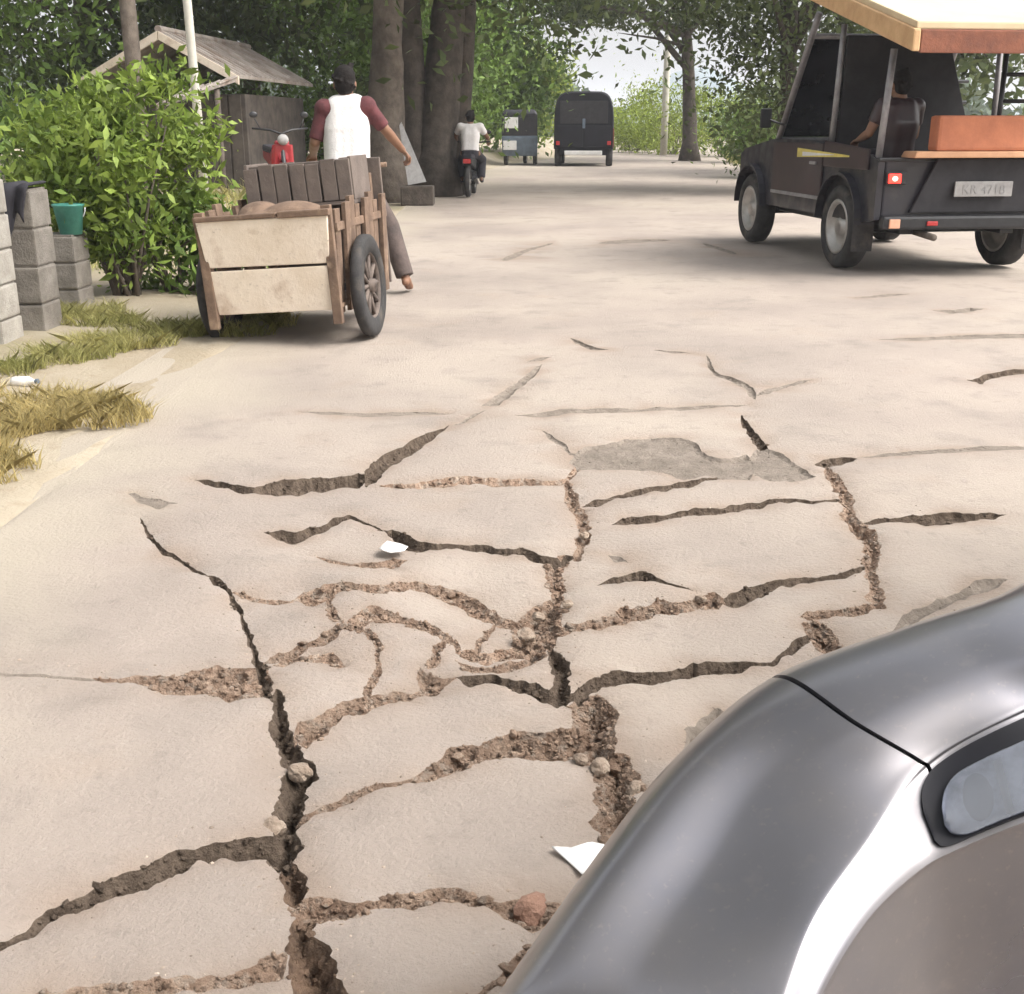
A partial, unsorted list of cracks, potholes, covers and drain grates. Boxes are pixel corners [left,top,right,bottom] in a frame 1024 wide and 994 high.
crack [0,350,1008,994]
crack [968,369,1024,384]
crack [501,243,552,261]
crack [703,243,736,254]
crack [571,338,608,350]
